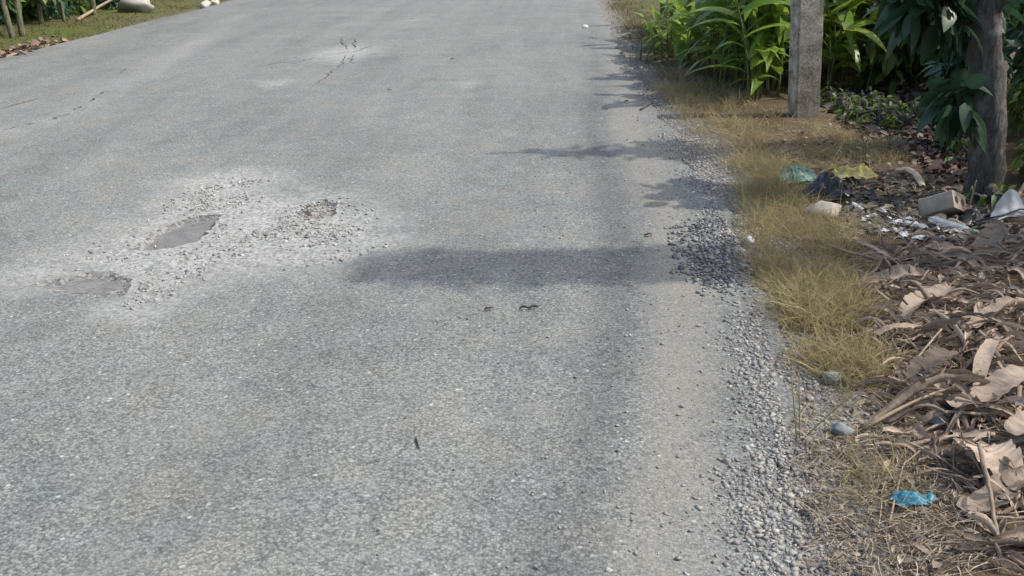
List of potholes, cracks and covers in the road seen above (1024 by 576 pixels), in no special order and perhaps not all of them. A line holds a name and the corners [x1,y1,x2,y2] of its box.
crack [1,69,126,130]
pothole [298,198,338,220]
crack [263,38,370,87]
pothole [132,214,222,251]
pothole [33,271,132,300]
